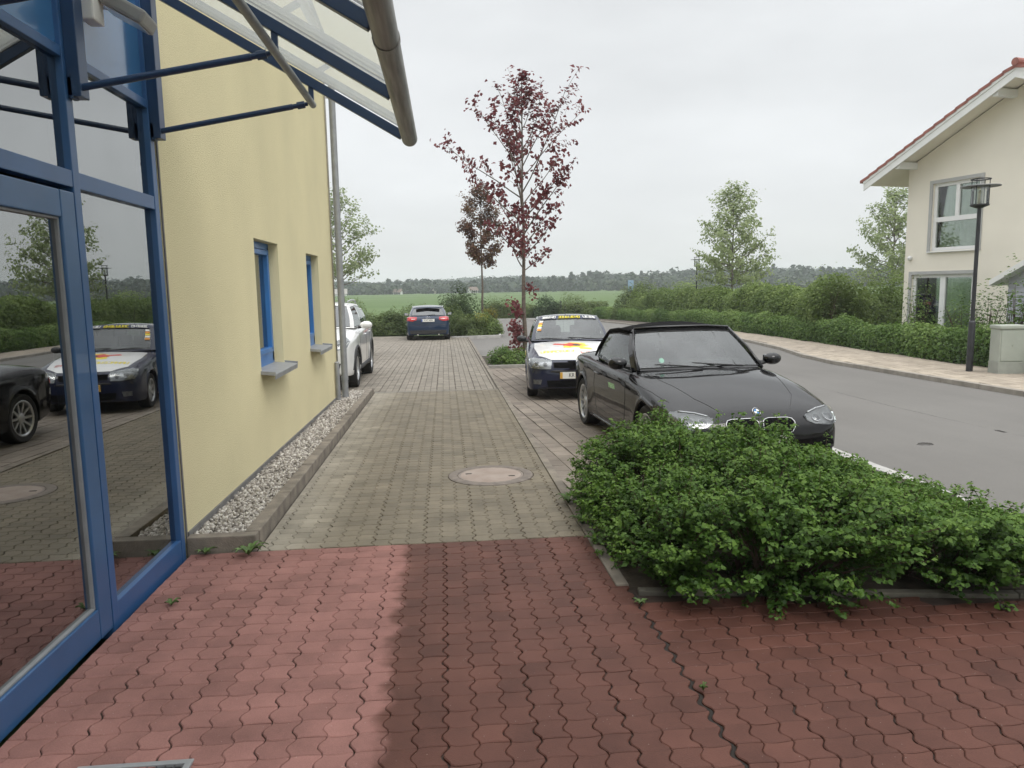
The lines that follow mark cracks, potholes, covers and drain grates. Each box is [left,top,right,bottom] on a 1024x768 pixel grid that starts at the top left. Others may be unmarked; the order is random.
drain grate [77,759,194,768]
manhole cover [448,465,533,486]
